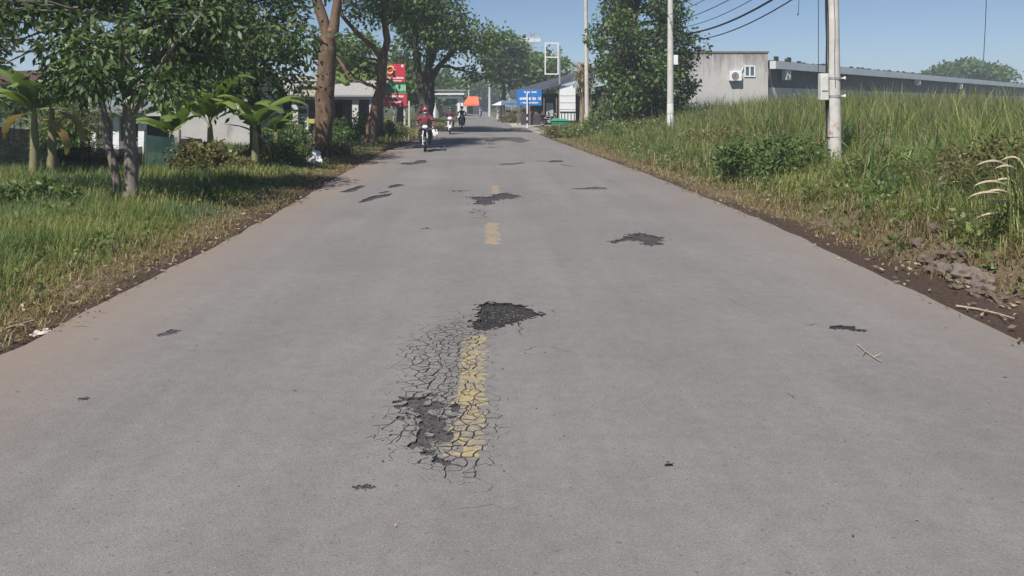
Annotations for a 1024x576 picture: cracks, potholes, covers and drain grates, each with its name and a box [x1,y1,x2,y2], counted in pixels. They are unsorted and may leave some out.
pothole [607,232,666,247]
crack [348,300,571,532]
pothole [467,301,547,331]
pothole [465,193,521,206]
